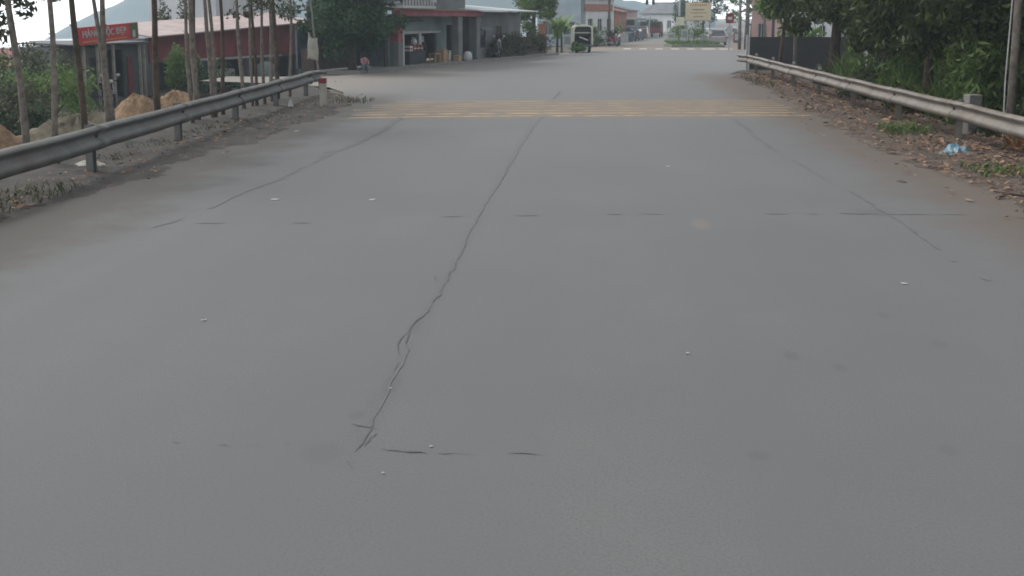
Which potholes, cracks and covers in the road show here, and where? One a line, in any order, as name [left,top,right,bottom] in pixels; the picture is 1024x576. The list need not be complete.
crack [137,91,967,467]
